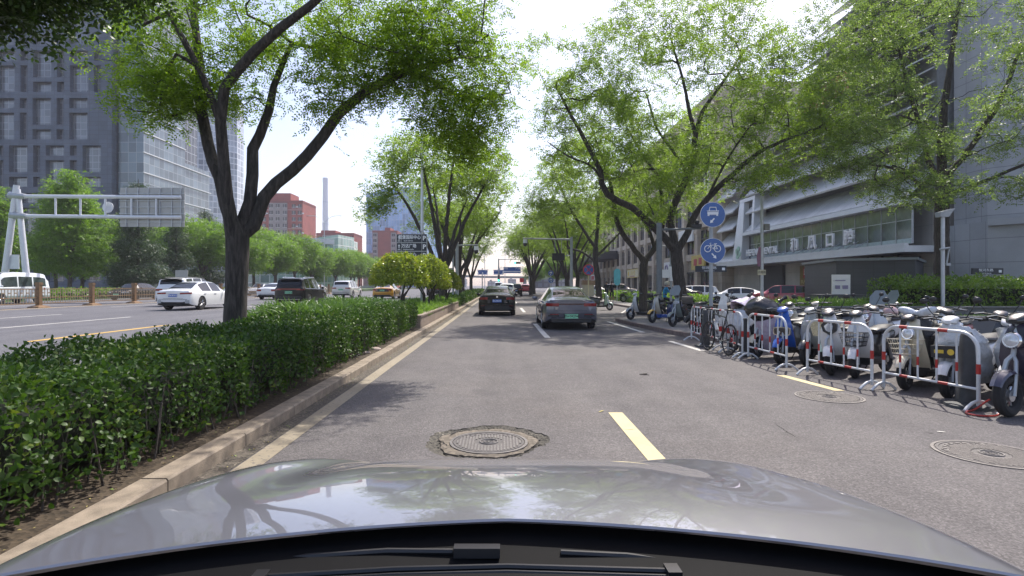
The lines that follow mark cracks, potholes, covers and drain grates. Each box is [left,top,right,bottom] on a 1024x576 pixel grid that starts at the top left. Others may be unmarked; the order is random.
manhole cover [450,431,528,454]
manhole cover [930,440,1024,470]
manhole cover [794,390,866,404]
